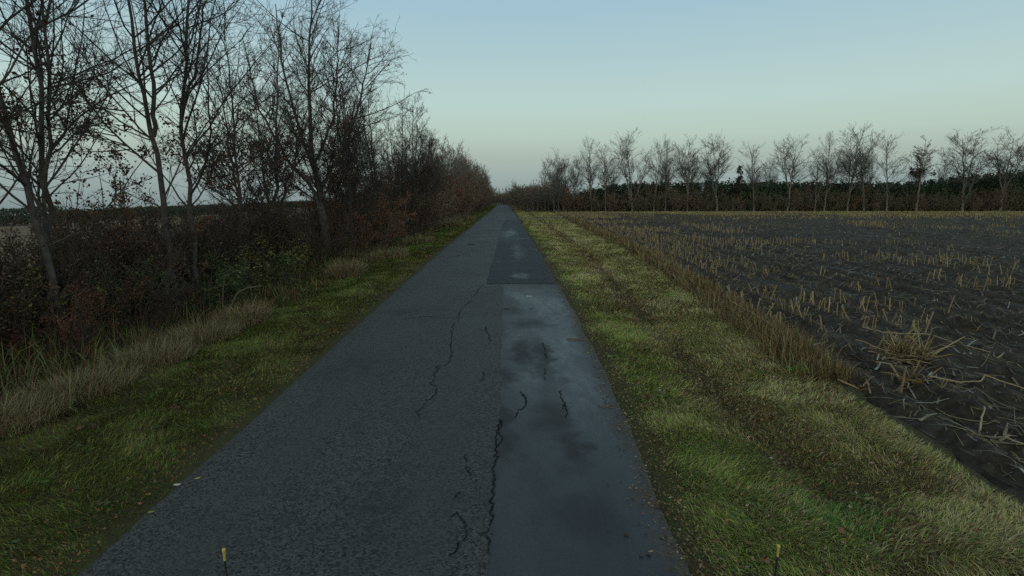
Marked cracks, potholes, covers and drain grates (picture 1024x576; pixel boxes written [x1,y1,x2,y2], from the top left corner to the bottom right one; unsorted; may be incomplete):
crack [450,456,474,555]
crack [406,289,479,416]
